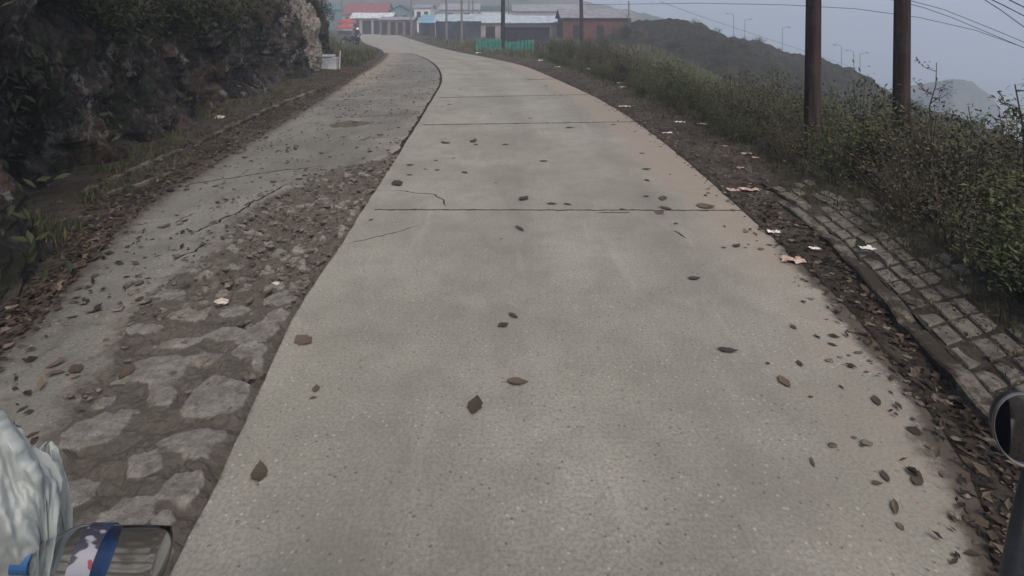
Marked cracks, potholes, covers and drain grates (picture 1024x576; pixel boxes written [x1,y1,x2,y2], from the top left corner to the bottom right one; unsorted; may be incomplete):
crack [343,190,740,245]
crack [169,165,329,261]
